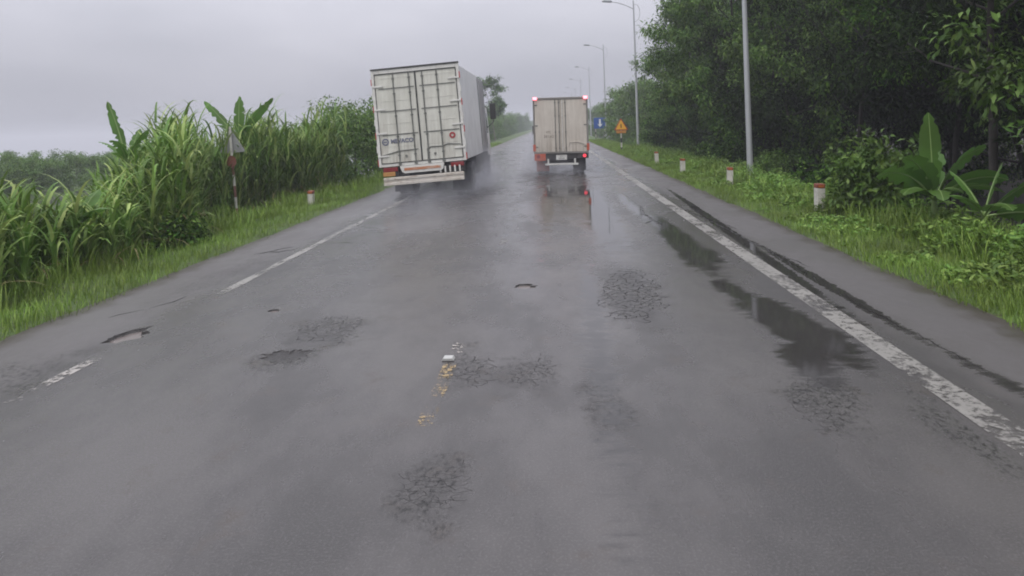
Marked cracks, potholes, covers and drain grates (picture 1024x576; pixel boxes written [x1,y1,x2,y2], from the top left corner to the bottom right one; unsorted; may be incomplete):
pothole [258,349,313,365]
pothole [102,326,152,344]
crack [297,314,362,344]
crack [396,460,477,509]
crack [788,378,855,432]
crack [443,354,560,388]
crack [598,269,665,323]
